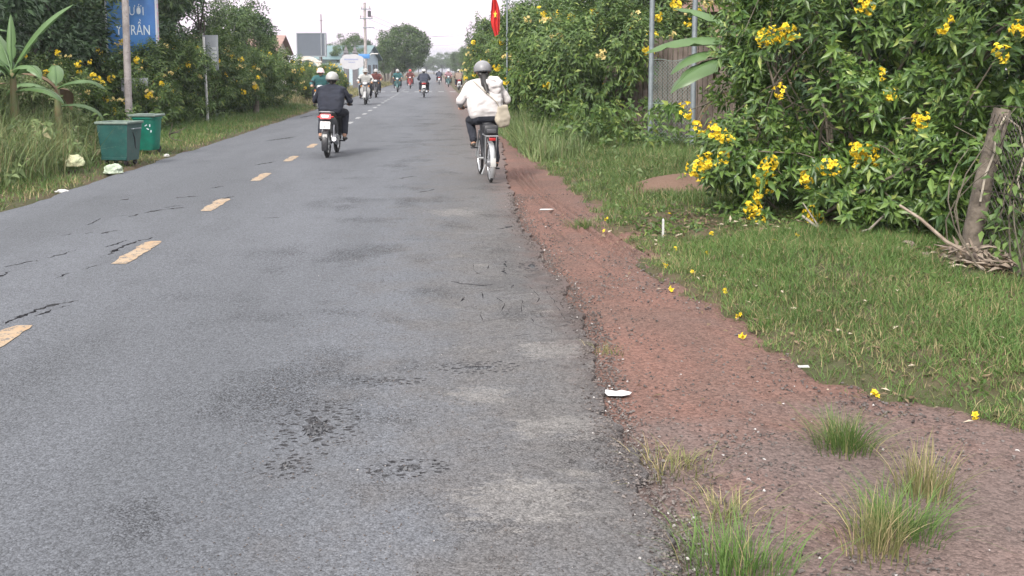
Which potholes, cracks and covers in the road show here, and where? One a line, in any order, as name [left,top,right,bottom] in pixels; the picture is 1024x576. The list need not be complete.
pothole [435,361,520,374]
crack [0,196,195,278]
pothole [366,459,450,478]
pothole [265,401,363,456]
